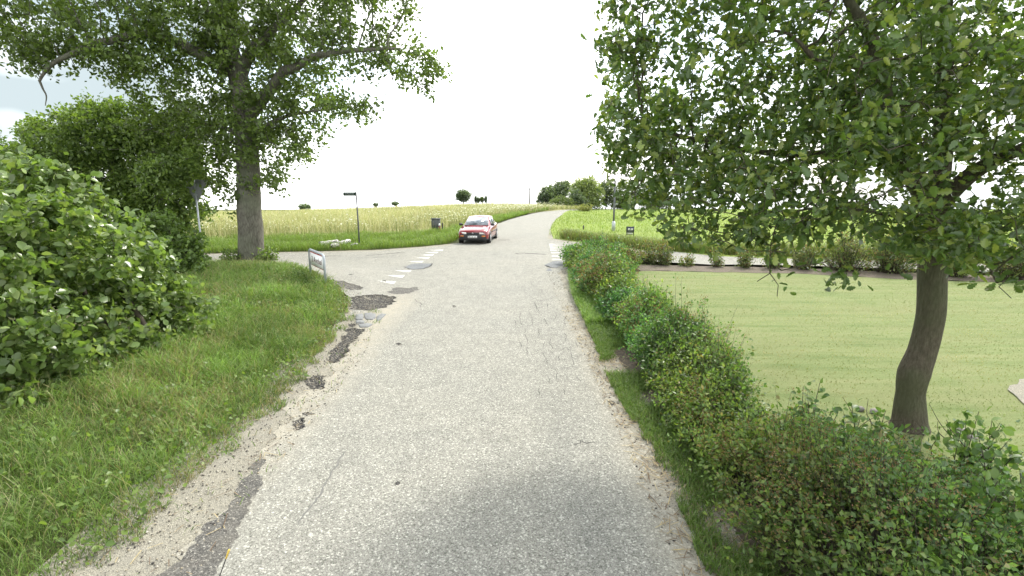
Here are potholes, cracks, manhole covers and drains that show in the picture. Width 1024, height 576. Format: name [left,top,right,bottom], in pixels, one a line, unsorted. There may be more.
pothole [306,375,325,389]
crack [515,295,587,394]
pothole [347,294,396,311]
pothole [328,324,365,362]
